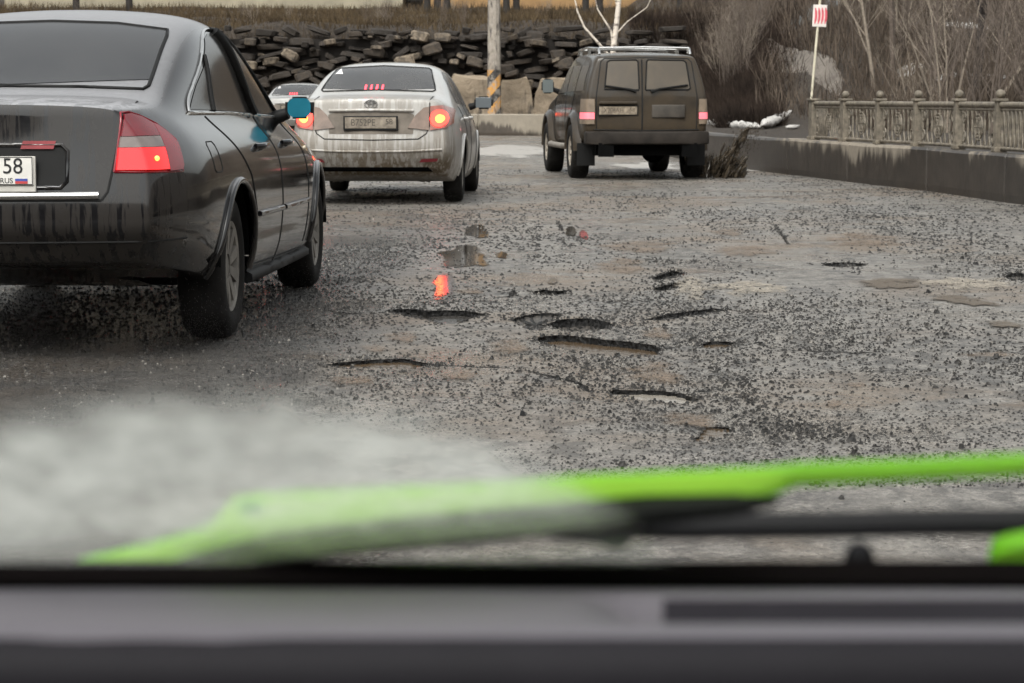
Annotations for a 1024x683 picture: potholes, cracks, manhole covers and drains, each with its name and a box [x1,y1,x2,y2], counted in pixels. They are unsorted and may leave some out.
pothole [327,359,428,369]
pothole [533,335,662,357]
pothole [547,318,615,331]
pothole [513,313,562,330]
pothole [609,390,699,403]
pothole [654,271,683,280]
pothole [699,341,734,349]
pothole [391,309,485,324]
